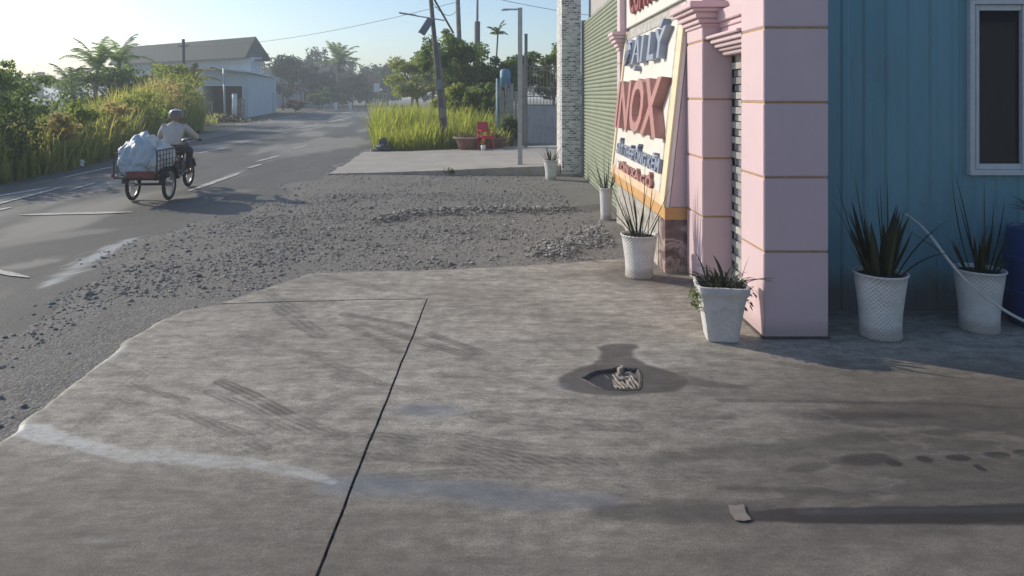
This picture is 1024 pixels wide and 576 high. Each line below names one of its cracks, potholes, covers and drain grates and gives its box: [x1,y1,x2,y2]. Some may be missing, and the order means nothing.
pothole [580,365,643,391]
